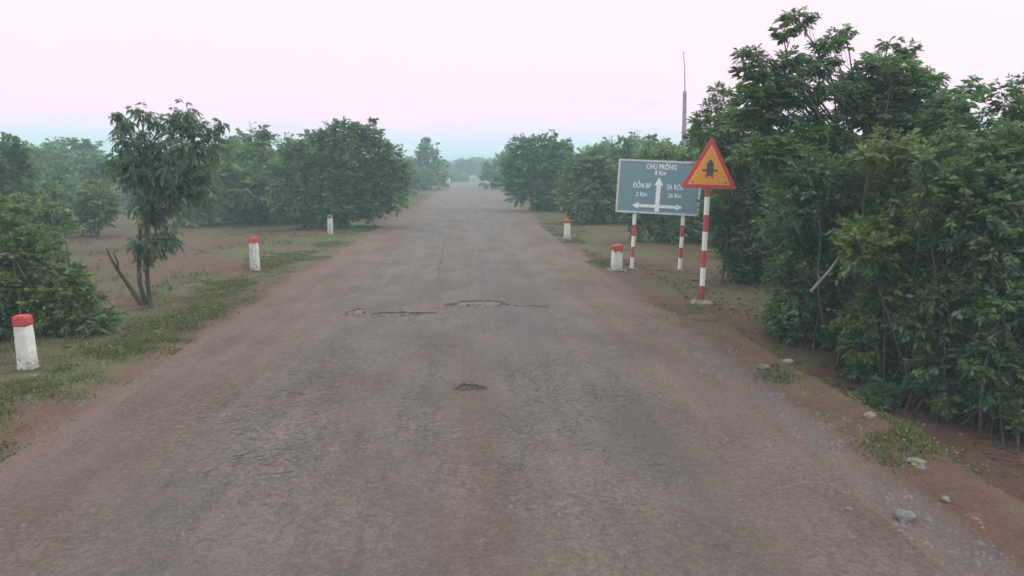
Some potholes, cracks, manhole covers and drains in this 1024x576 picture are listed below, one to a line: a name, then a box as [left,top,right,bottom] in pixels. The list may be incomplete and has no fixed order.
pothole [452,381,489,394]
pothole [431,299,525,309]
pothole [337,308,371,318]
